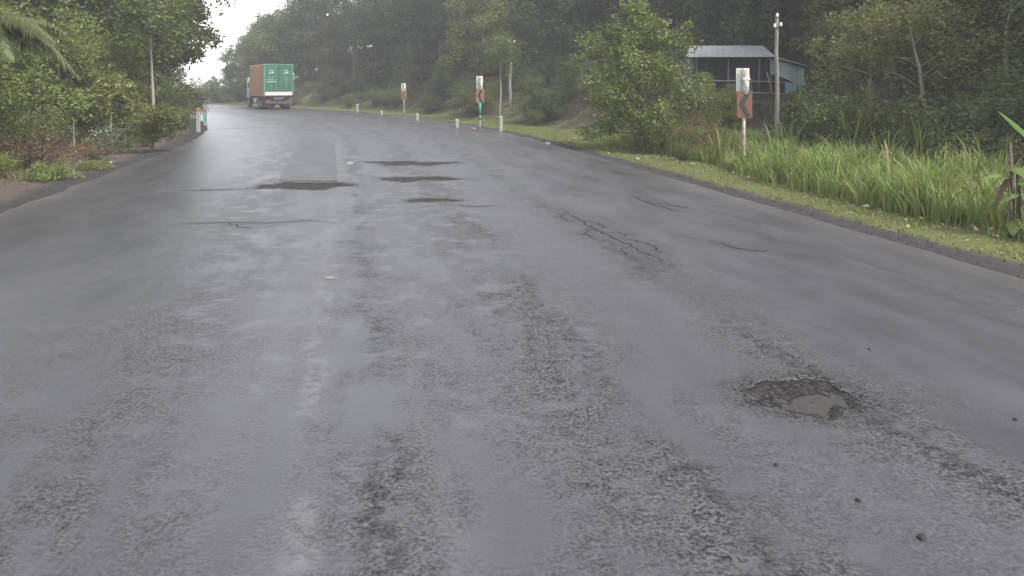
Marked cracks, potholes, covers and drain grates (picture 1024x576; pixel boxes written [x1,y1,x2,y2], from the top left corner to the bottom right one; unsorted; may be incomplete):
pothole [739,378,868,421]
crack [561,213,662,260]
